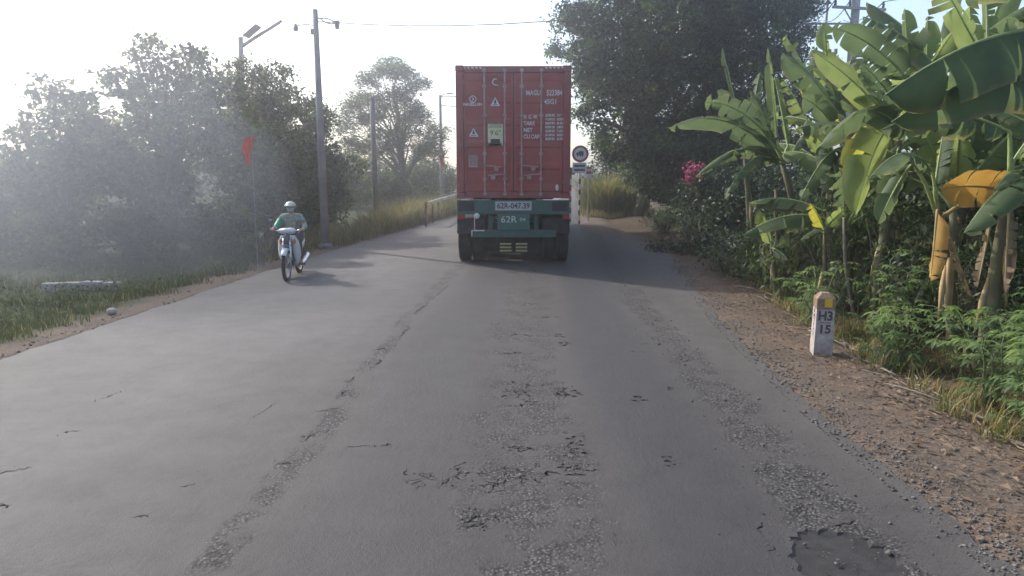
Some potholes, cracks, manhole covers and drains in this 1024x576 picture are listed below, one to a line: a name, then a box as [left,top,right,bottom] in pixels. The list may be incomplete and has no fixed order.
pothole [788,528,910,576]
crack [464,514,500,528]
crack [403,462,600,493]
